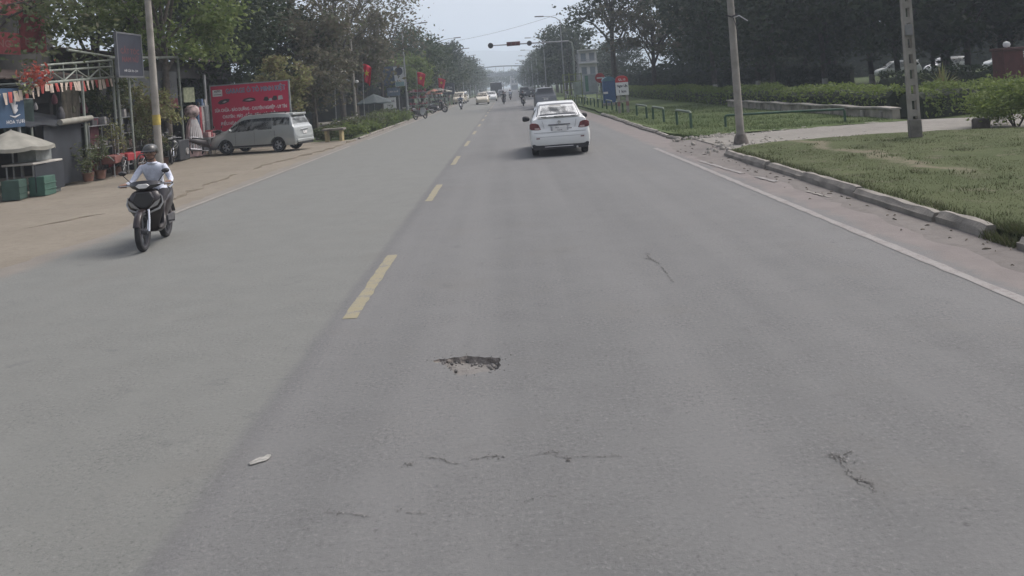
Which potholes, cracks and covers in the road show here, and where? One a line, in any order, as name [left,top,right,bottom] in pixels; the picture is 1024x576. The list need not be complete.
pothole [431,353,511,376]
crack [404,449,619,467]
crack [826,450,885,494]
